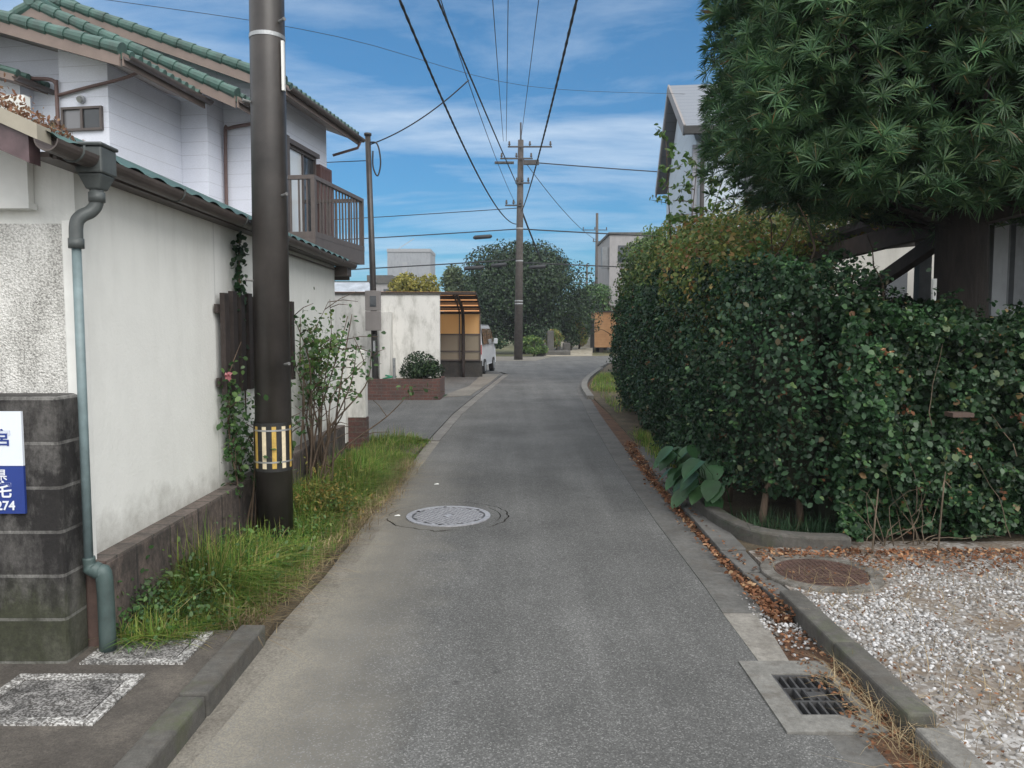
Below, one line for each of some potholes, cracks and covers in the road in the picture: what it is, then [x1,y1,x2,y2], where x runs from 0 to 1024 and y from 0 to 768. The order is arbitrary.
drain grate [738,661,890,738]
manhole cover [759,555,886,594]
manhole cover [406,506,490,527]
crack [387,507,509,532]
